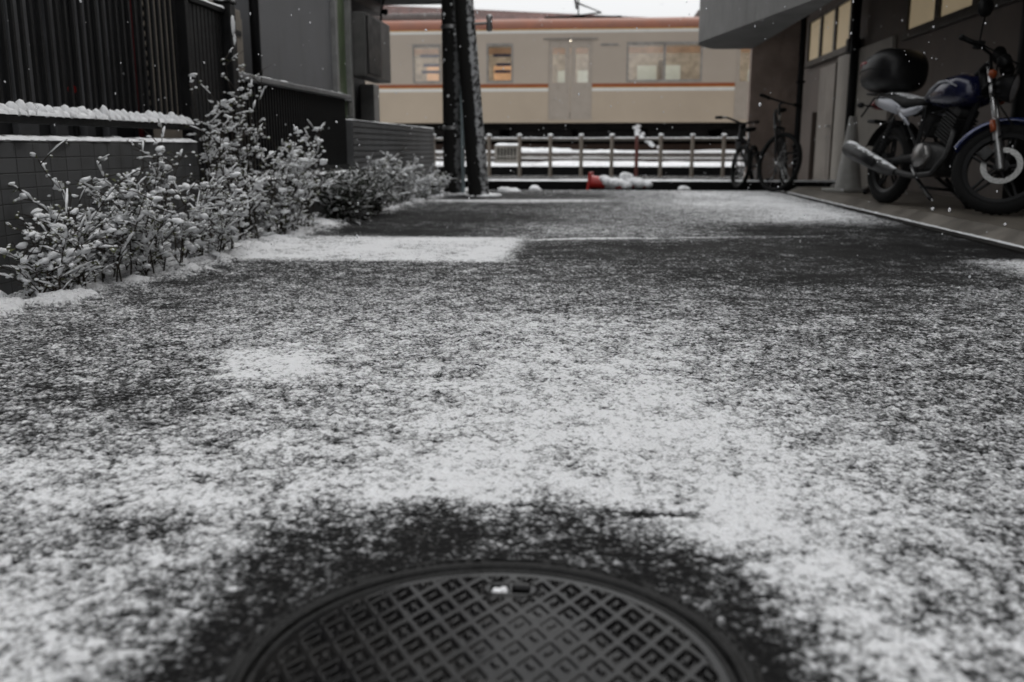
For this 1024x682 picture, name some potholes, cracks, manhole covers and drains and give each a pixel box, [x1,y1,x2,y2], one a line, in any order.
manhole cover [219,557,759,682]
